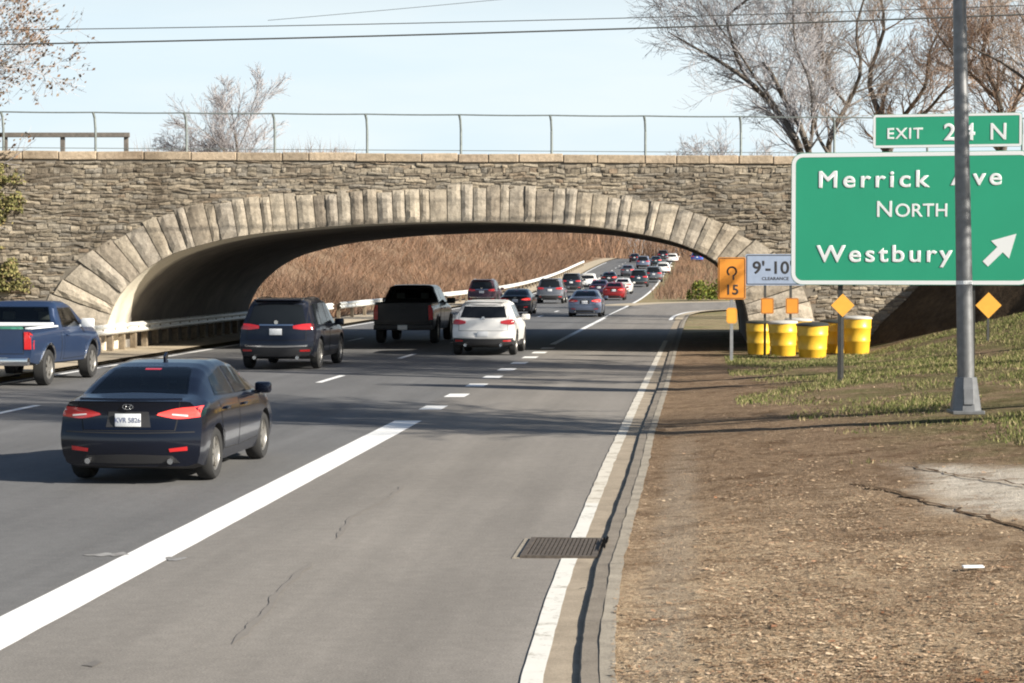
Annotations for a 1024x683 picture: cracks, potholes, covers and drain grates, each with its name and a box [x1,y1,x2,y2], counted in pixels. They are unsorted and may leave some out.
crack [336,484,405,539]
crack [232,562,312,644]
drain grate [512,537,603,559]
